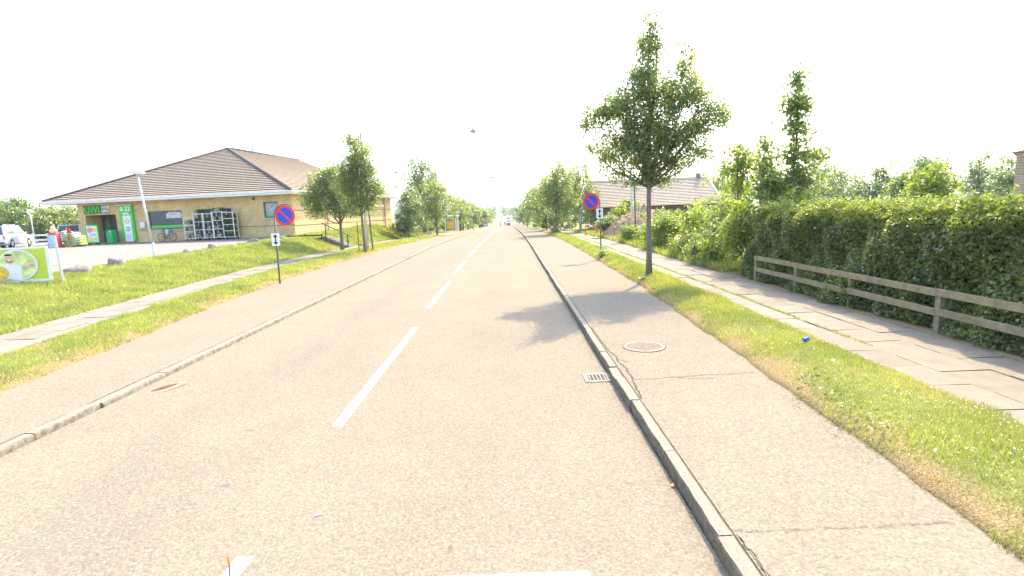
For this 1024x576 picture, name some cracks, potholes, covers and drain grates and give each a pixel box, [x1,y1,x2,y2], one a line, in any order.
crack [592,328,745,398]
drain grate [582,373,612,383]
manhole cover [622,341,666,352]
manhole cover [144,381,188,394]
